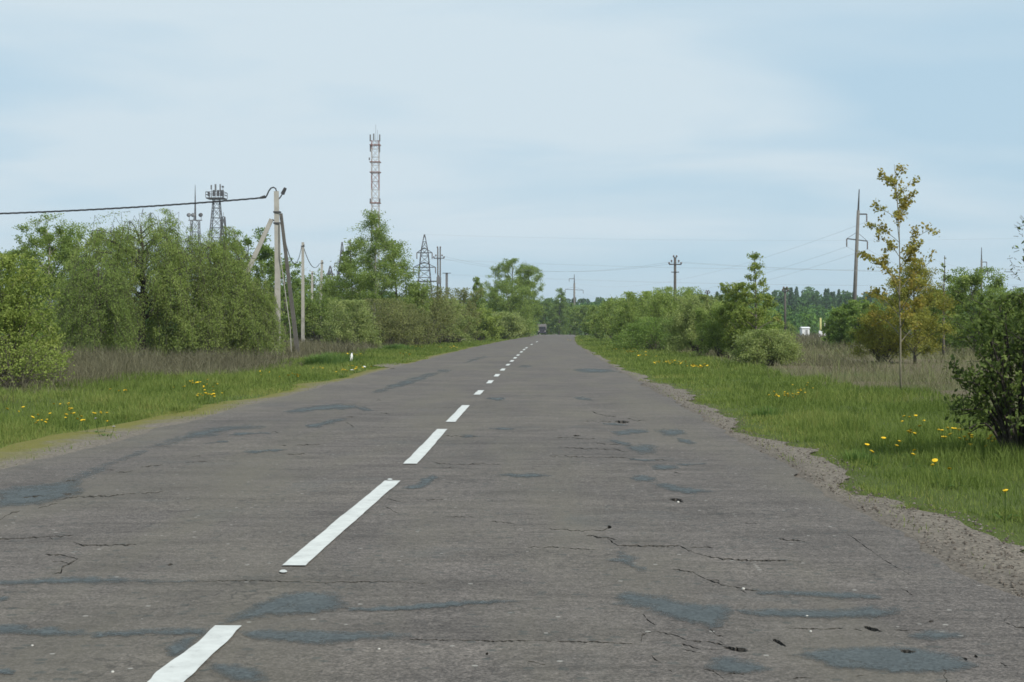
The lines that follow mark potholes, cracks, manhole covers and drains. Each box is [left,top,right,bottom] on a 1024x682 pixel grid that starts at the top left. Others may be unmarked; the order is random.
crack [0,535,136,574]
crack [530,529,786,593]
